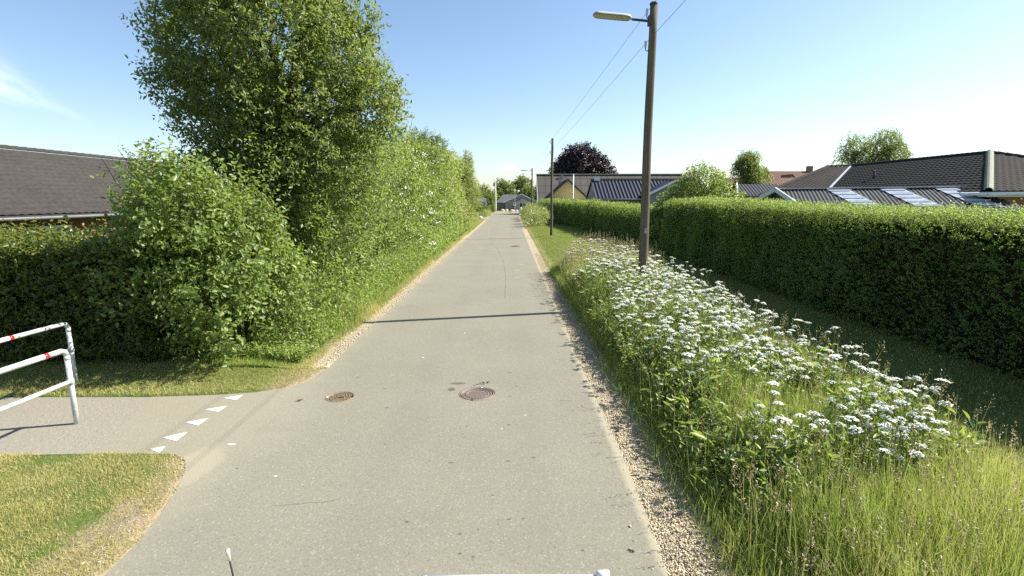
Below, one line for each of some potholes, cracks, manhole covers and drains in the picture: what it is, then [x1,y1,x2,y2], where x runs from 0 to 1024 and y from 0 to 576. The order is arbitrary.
manhole cover [325,391,355,402]
manhole cover [459,387,496,401]
